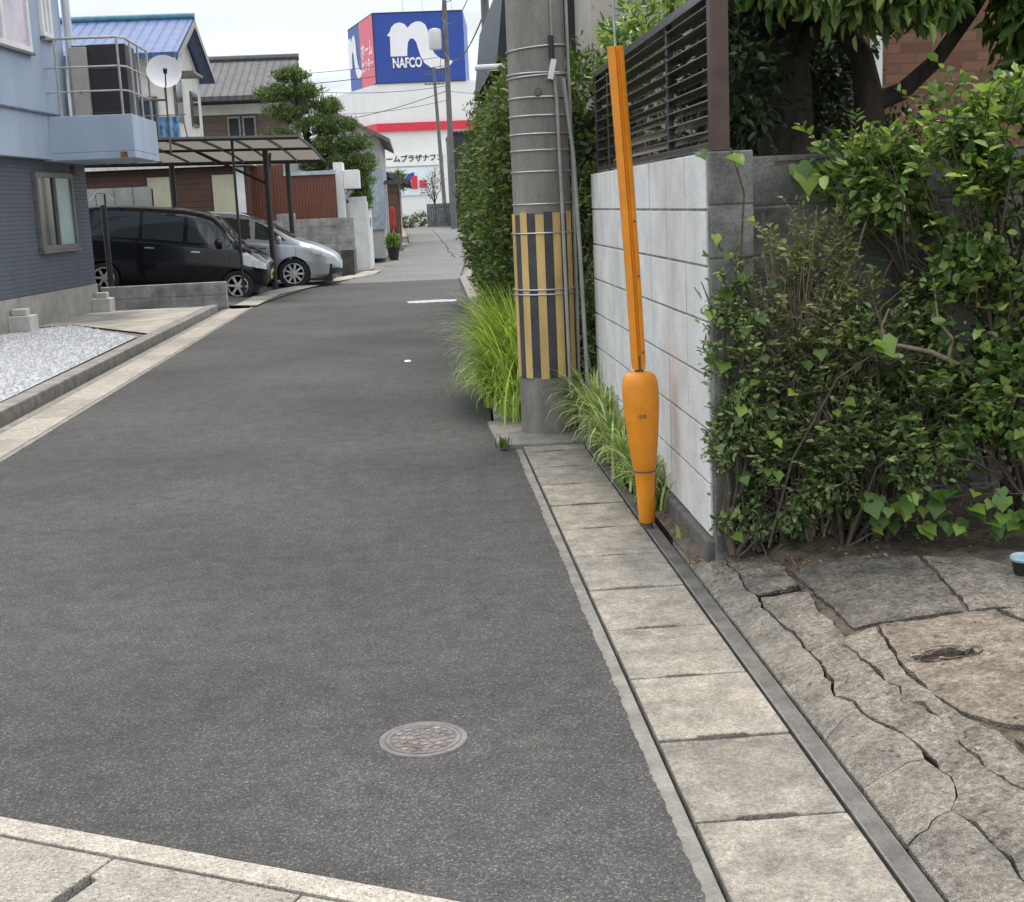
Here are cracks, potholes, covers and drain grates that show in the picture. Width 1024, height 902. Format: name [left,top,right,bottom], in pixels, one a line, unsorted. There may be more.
pothole [906,644,983,662]
manhole cover [379,721,468,758]
crack [708,565,1019,878]
